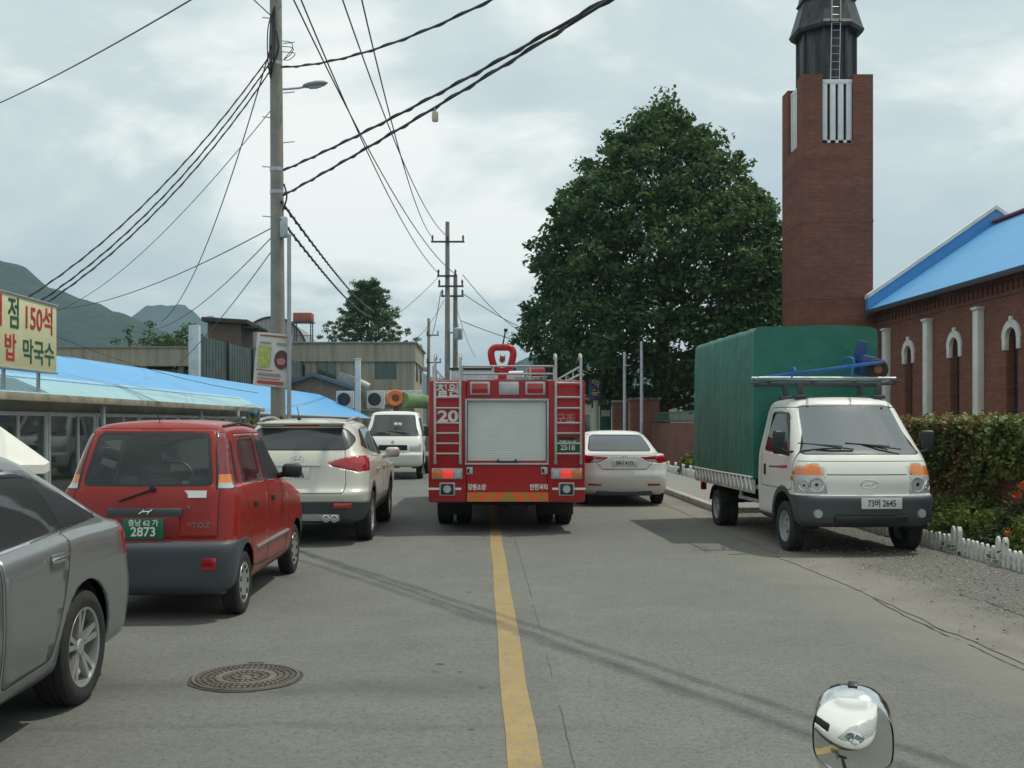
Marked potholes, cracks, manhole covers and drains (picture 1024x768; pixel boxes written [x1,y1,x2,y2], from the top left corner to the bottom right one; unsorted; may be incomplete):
manhole cover [187,662,304,692]
crack [873,598,1024,670]
